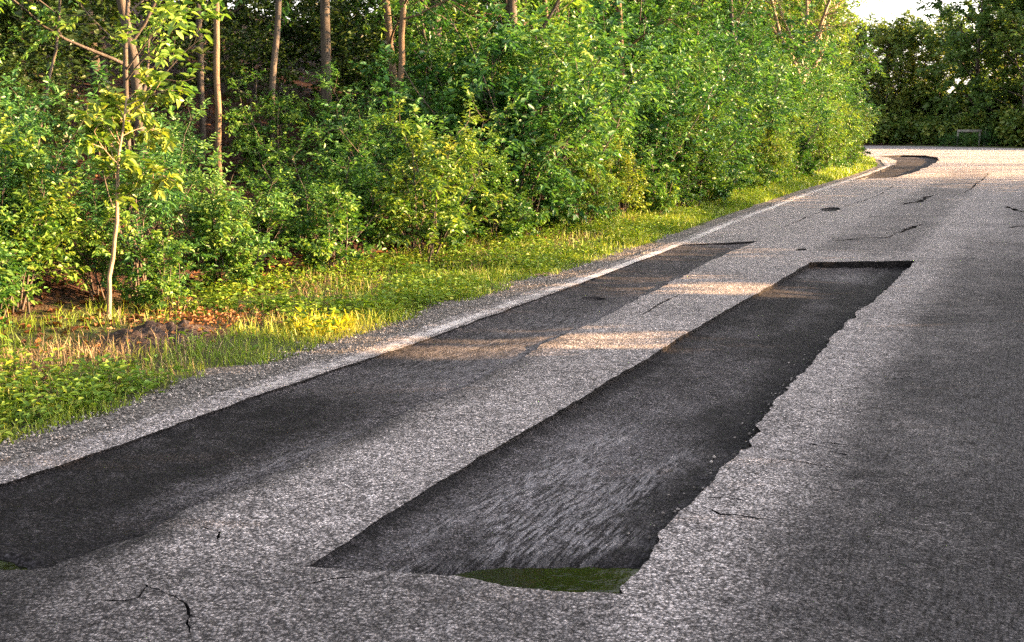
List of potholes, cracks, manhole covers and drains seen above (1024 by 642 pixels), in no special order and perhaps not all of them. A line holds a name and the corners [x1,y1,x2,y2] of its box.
crack [102,585,202,635]
pothole [309,260,915,594]
pothole [852,155,940,179]
pothole [0,241,757,570]
crack [903,196,932,205]
crack [846,224,922,240]
crack [700,497,767,520]
